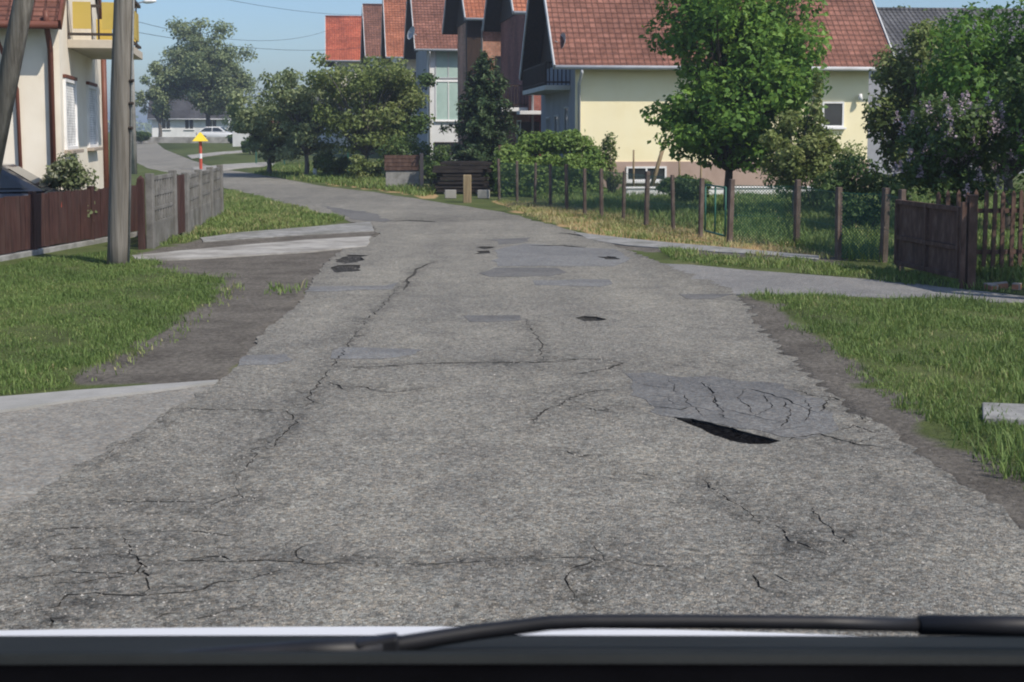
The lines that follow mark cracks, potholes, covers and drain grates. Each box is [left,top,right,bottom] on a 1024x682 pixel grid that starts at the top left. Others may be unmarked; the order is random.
pothole [331,265,360,273]
pothole [336,255,363,264]
crack [705,481,859,552]
crack [371,327,621,372]
crack [4,527,490,626]
crack [531,544,668,606]
crack [184,263,430,508]
pothole [675,417,775,444]
